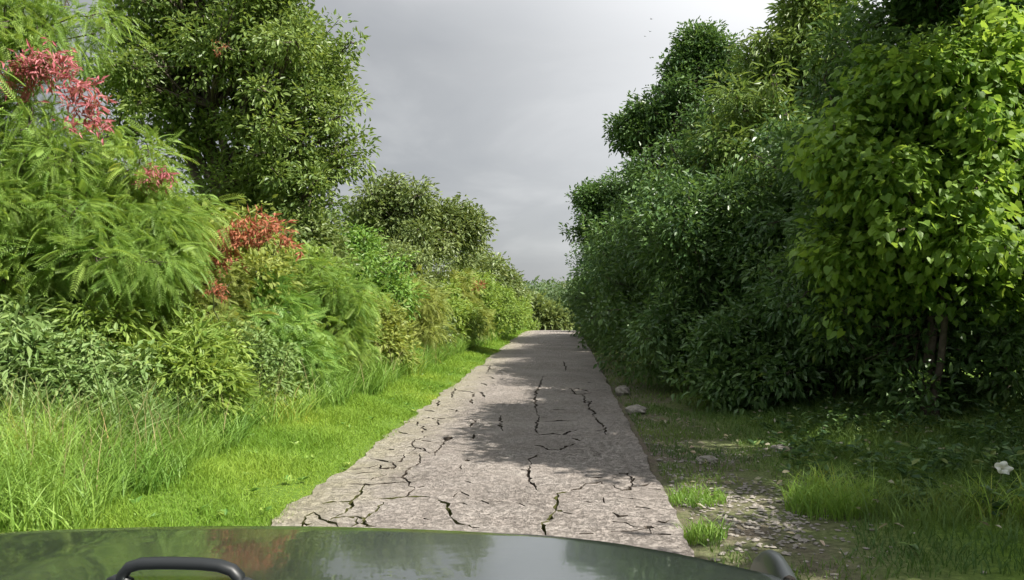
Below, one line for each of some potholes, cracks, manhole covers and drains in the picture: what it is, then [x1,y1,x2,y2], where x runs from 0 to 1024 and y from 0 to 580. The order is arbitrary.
crack [519,382,671,535]
crack [301,366,494,528]
